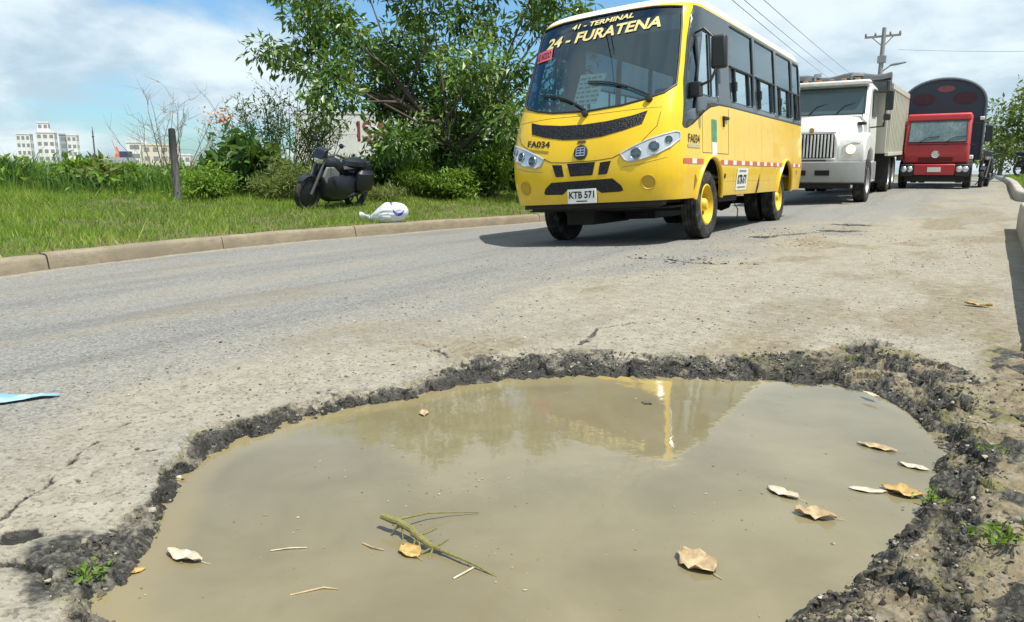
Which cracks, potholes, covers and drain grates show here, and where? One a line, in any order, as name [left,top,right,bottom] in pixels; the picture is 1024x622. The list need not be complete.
pothole [26,345,1019,622]
pothole [838,338,894,355]
crack [575,322,637,345]
pothole [0,523,48,547]
crack [0,419,154,522]
